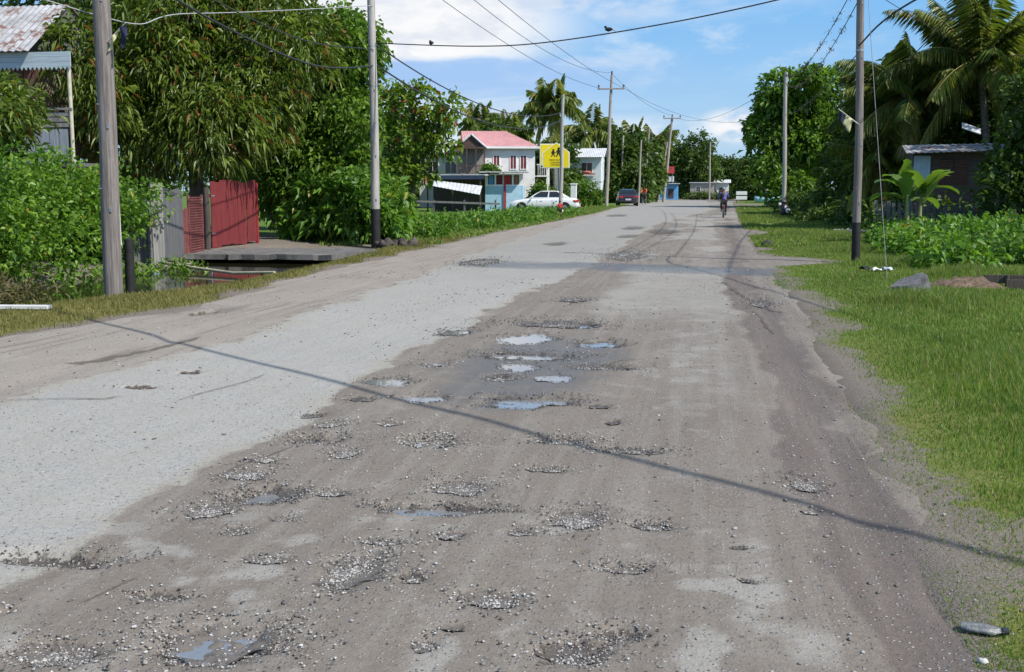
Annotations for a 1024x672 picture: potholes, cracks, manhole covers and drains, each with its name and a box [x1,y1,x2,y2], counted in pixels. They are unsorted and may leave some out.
pothole [268,528,438,624]
pothole [438,254,526,269]
pothole [476,626,647,672]
pothole [565,337,638,348]
pothole [146,492,255,526]
pothole [527,373,576,383]
pothole [477,331,565,345]
pothole [362,427,483,456]
pothole [349,498,525,517]
pothole [451,391,600,410]
pothole [582,555,668,579]
pothole [422,577,556,617]
